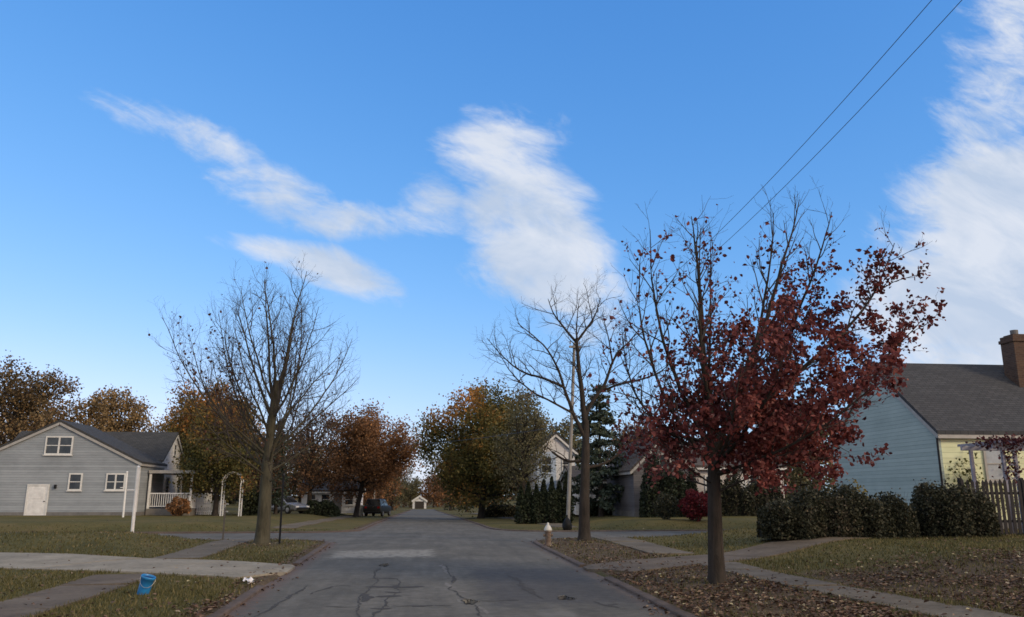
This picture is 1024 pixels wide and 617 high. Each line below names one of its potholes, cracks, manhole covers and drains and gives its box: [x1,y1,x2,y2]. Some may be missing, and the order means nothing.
crack [253,563,544,617]
